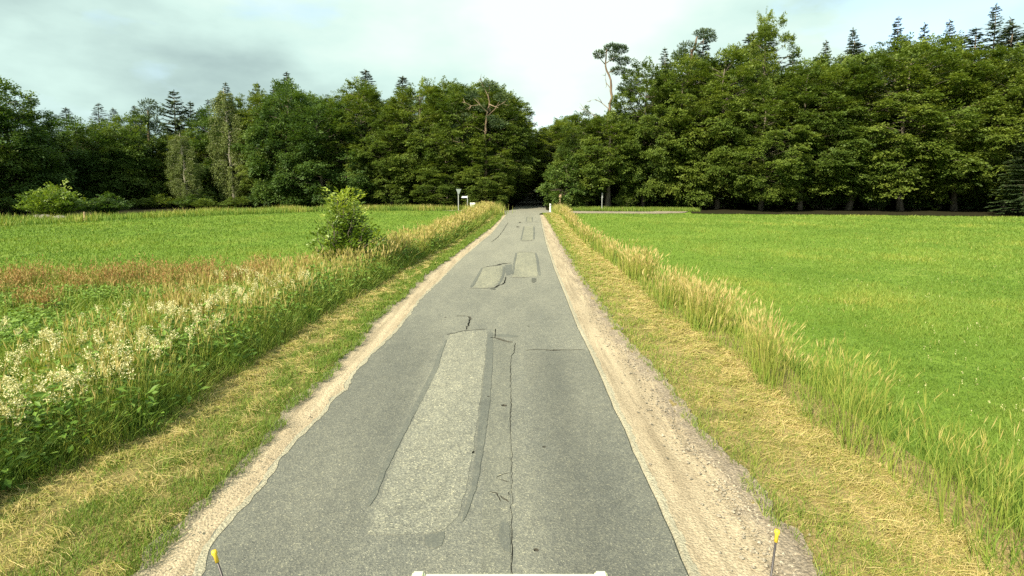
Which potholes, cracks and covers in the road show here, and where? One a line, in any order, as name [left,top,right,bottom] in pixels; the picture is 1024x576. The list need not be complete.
crack [447,316,516,574]
